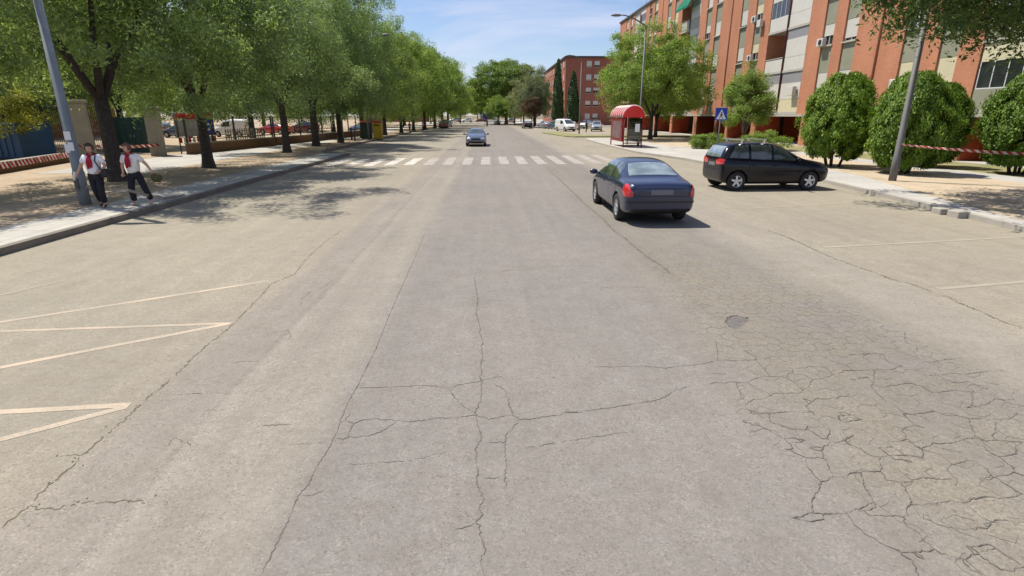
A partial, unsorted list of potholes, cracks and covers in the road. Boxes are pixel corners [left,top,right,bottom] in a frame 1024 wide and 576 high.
crack [598,248,1024,576]
crack [289,278,689,575]
crack [768,230,1022,328]
